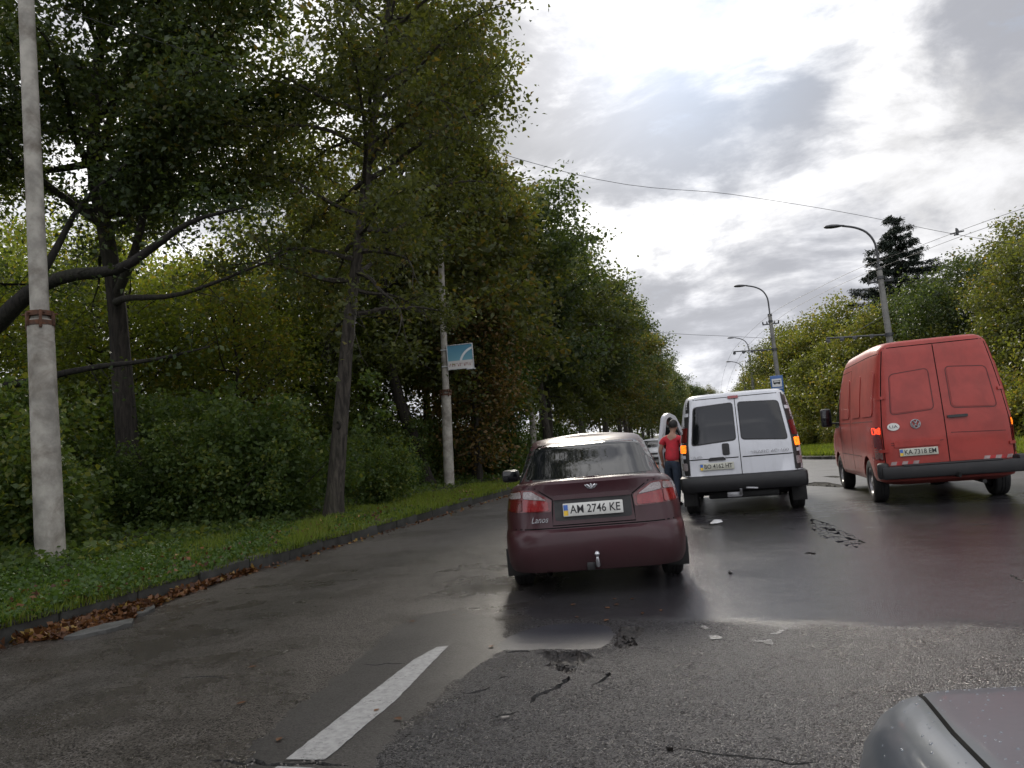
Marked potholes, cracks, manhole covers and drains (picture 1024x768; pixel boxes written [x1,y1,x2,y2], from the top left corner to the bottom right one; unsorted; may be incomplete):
crack [593,672,612,685]
crack [463,676,570,720]
pothole [537,650,593,674]
crack [653,748,821,765]
pothole [614,626,644,649]
